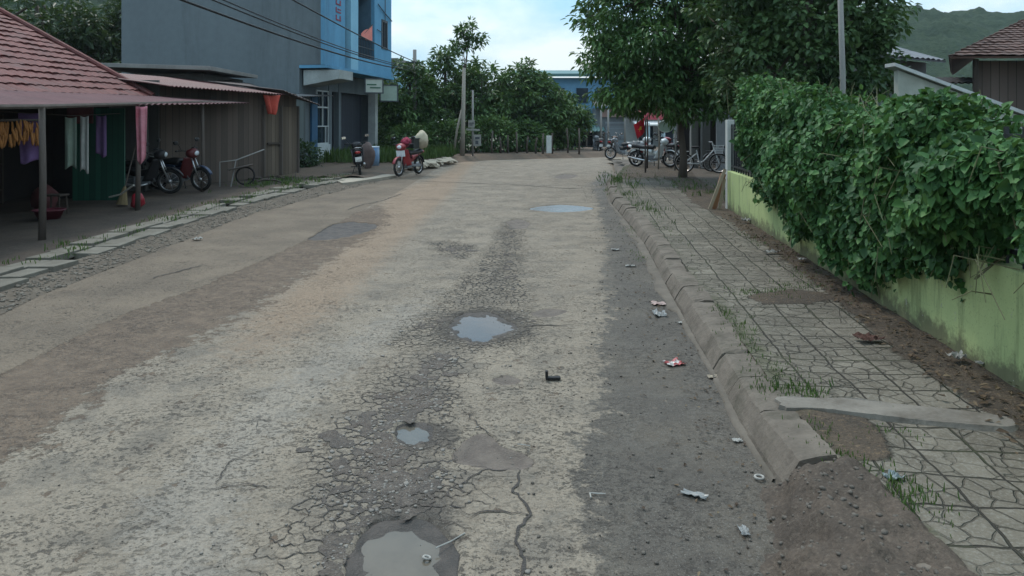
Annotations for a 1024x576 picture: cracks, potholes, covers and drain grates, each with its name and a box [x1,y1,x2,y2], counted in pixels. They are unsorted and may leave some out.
pothole [522,204,601,213]
pothole [381,416,447,451]
pothole [438,308,529,346]
pothole [327,509,477,576]
crack [212,223,546,576]
